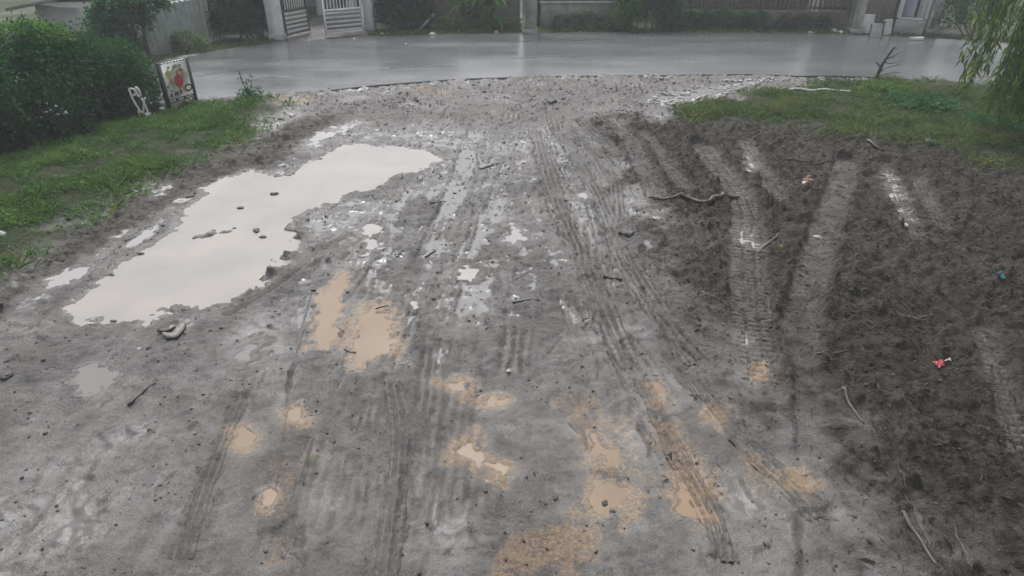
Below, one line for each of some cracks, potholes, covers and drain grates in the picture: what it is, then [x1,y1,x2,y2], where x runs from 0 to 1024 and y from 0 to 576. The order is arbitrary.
pothole [58,143,445,333]
pothole [62,357,121,410]
pothole [300,269,354,353]
